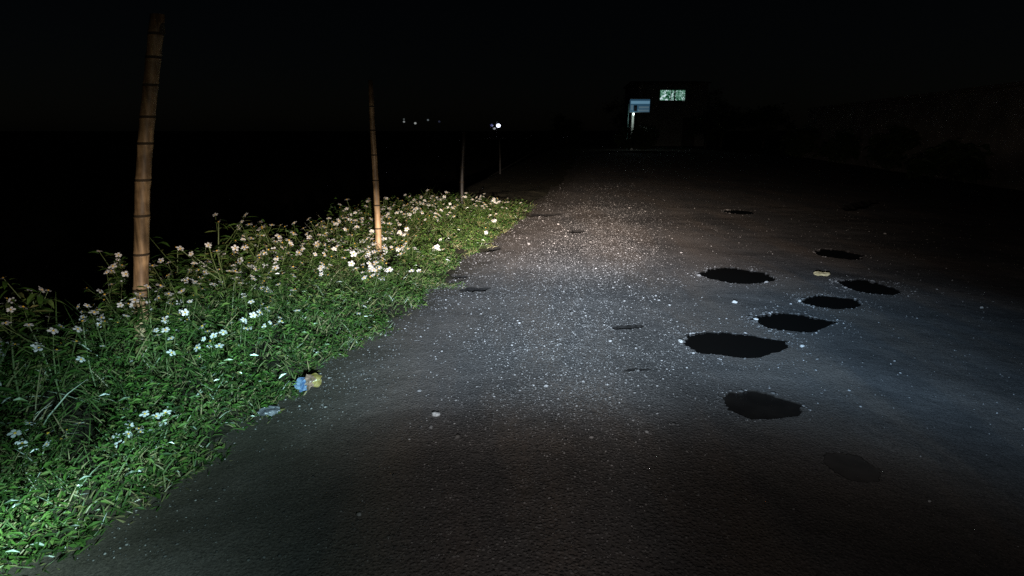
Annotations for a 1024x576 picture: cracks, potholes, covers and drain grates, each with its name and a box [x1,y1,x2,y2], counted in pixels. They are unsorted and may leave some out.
pothole [795,294,863,310]
pothole [814,248,864,260]
pothole [830,279,901,296]
pothole [680,331,794,360]
pothole [748,311,838,333]
pothole [717,389,810,423]
pothole [694,267,778,285]
